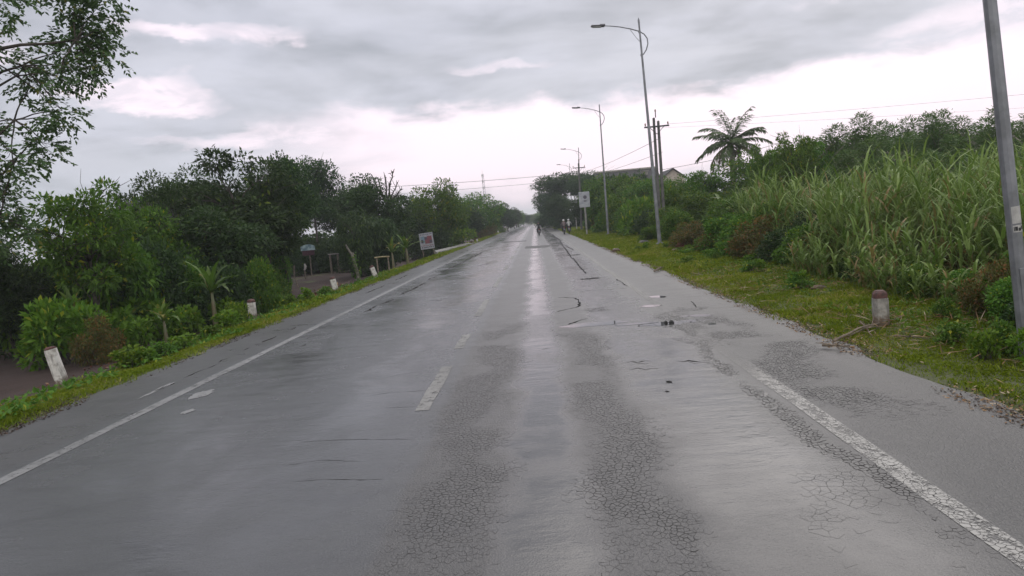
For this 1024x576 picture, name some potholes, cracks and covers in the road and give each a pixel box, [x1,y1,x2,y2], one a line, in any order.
crack [286,297,1000,576]
